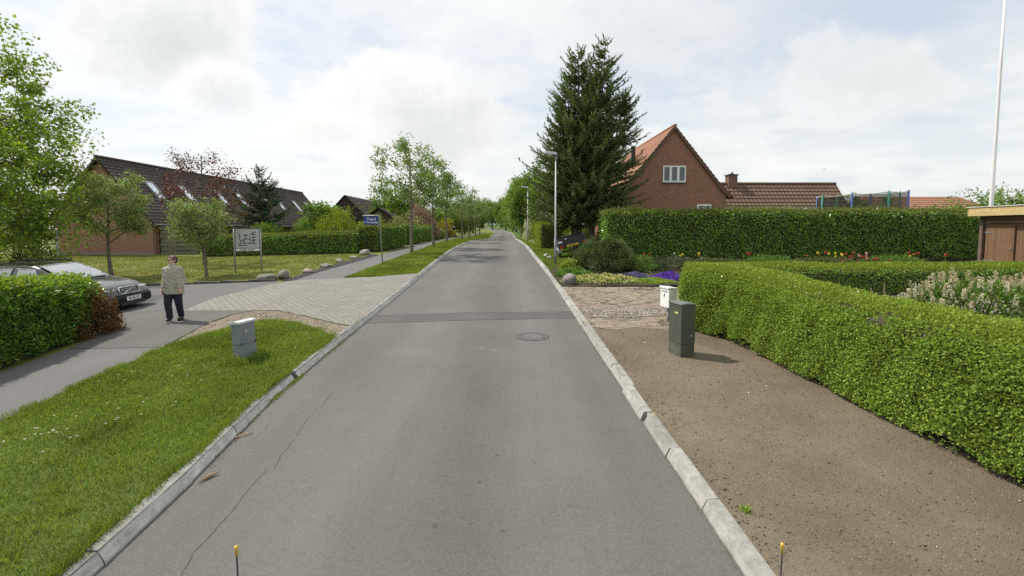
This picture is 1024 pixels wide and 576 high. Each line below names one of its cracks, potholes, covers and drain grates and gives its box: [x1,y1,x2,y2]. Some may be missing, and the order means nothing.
crack [180,399,327,576]
manhole cover [515,332,549,341]
